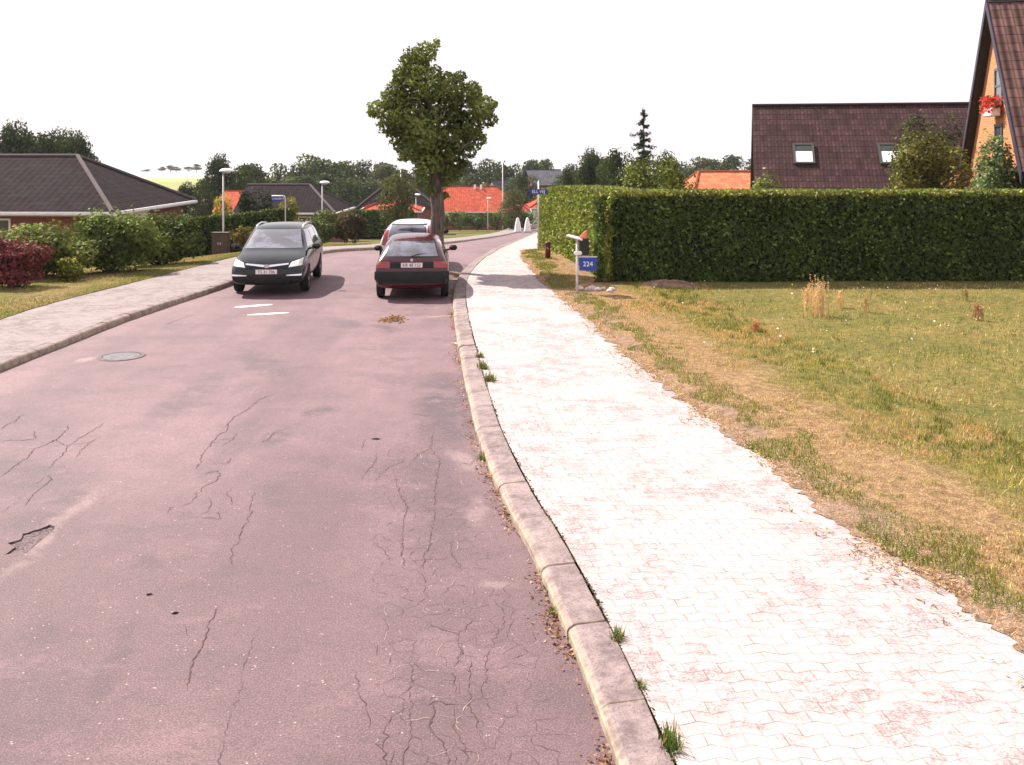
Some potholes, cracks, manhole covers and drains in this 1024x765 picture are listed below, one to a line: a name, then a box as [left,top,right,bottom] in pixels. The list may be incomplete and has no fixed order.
crack [372,422,565,765]
pothole [5,525,55,555]
crack [218,636,253,765]
crack [2,416,102,510]
manhole cover [97,351,146,361]
crack [167,394,272,562]
crack [183,606,219,688]
